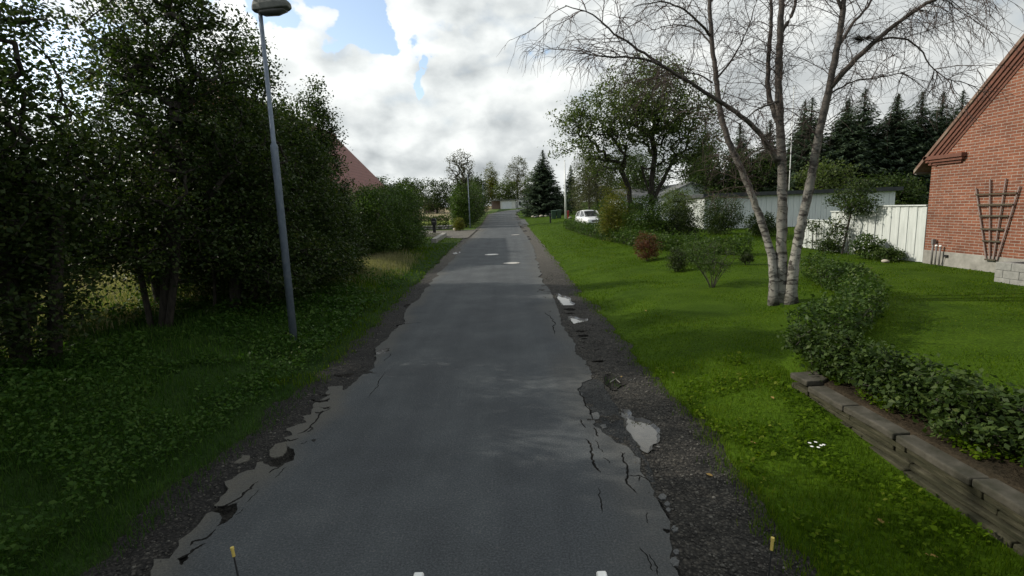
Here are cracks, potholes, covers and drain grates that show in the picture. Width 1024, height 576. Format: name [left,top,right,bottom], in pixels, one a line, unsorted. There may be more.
pothole [265,447,295,468]
pothole [214,503,237,524]
pothole [555,293,575,306]
crack [640,548,681,576]
crack [578,390,650,513]
pothole [621,409,662,454]
